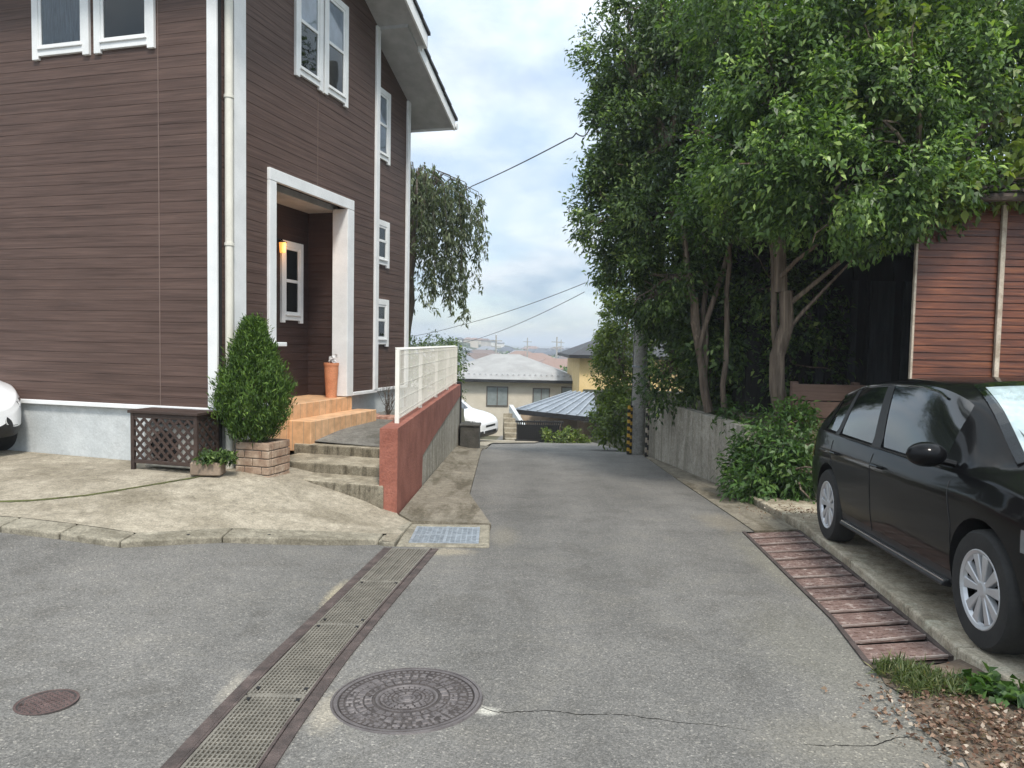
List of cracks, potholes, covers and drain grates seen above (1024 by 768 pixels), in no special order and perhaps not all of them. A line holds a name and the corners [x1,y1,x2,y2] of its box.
crack [482,707,751,731]
manhole cover [330,667,483,735]
crack [802,736,930,746]
